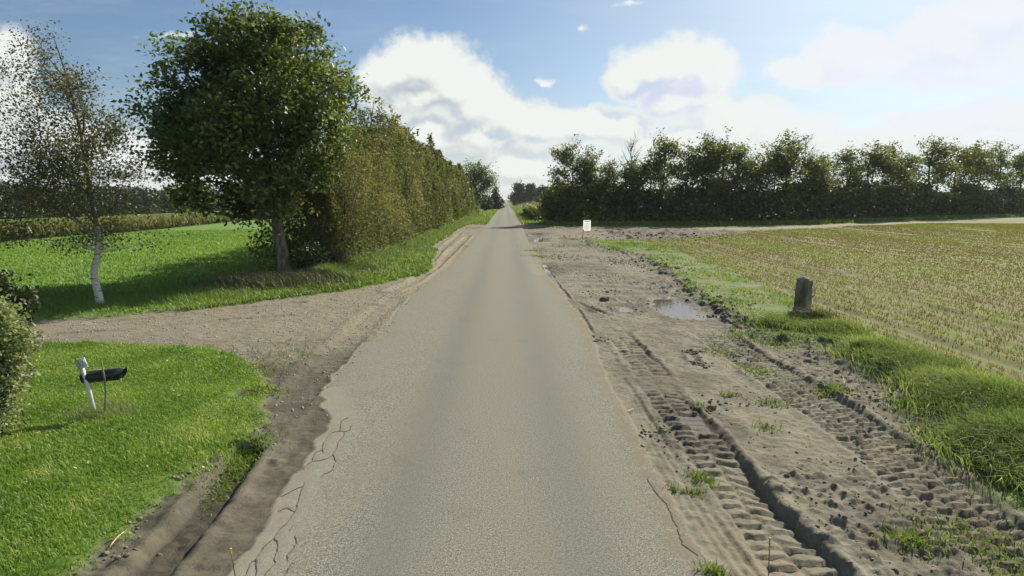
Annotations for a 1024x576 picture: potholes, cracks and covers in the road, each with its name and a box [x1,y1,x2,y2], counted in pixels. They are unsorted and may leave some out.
crack [647,478,698,556]
crack [304,418,351,478]
crack [245,483,305,576]
